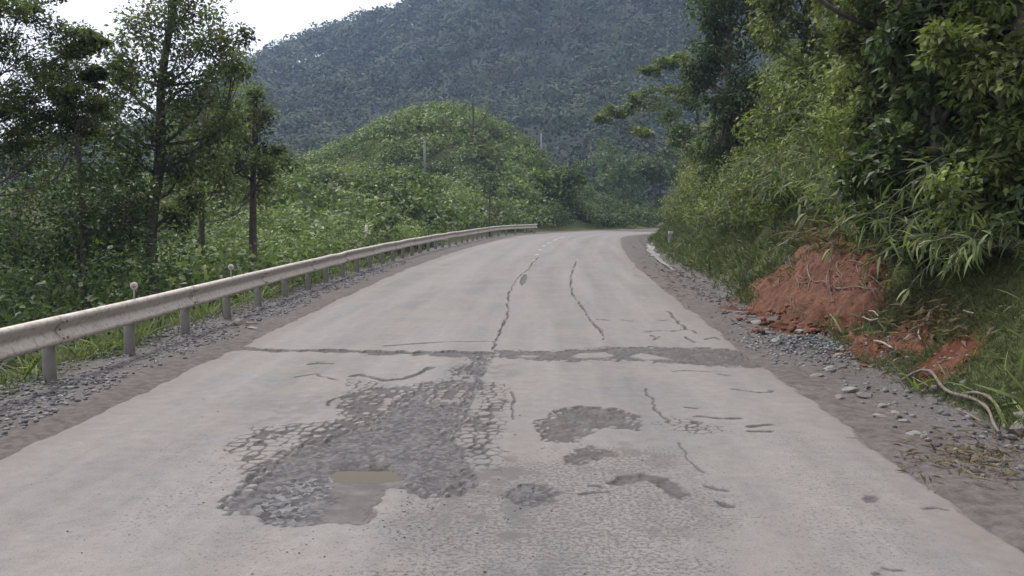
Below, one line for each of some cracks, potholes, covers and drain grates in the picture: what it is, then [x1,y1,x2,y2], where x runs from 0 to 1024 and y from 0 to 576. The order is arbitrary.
pothole [503,483,563,508]
pothole [563,445,619,466]
pothole [215,352,497,528]
pothole [532,405,644,443]
crack [653,407,775,435]
crack [222,257,540,475]
pothole [605,473,692,500]
crack [569,261,721,343]
